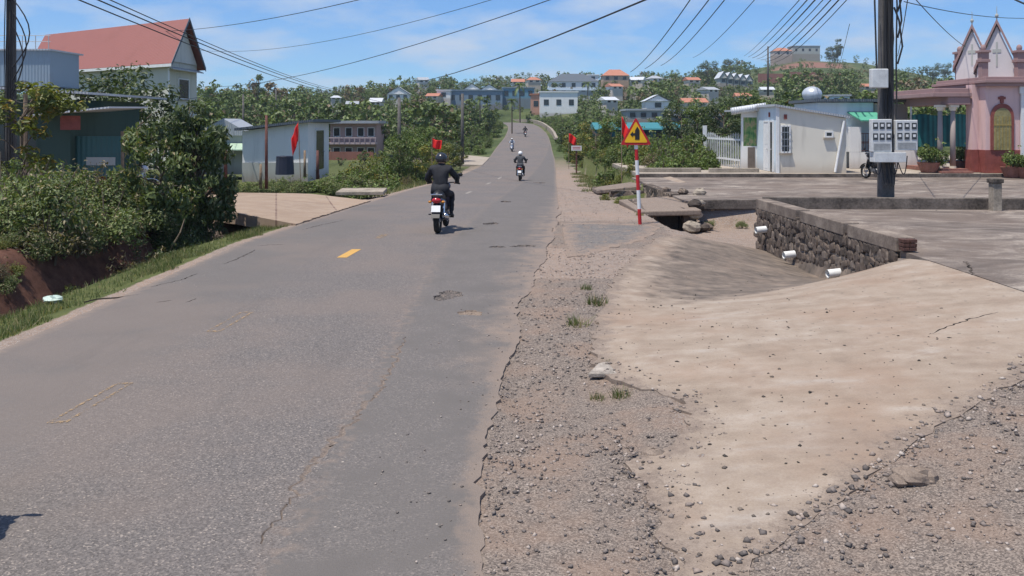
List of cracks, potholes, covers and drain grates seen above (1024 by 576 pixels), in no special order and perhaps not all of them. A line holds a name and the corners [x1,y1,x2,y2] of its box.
crack [260,337,406,544]
crack [930,312,997,334]
pothole [433,290,463,301]
